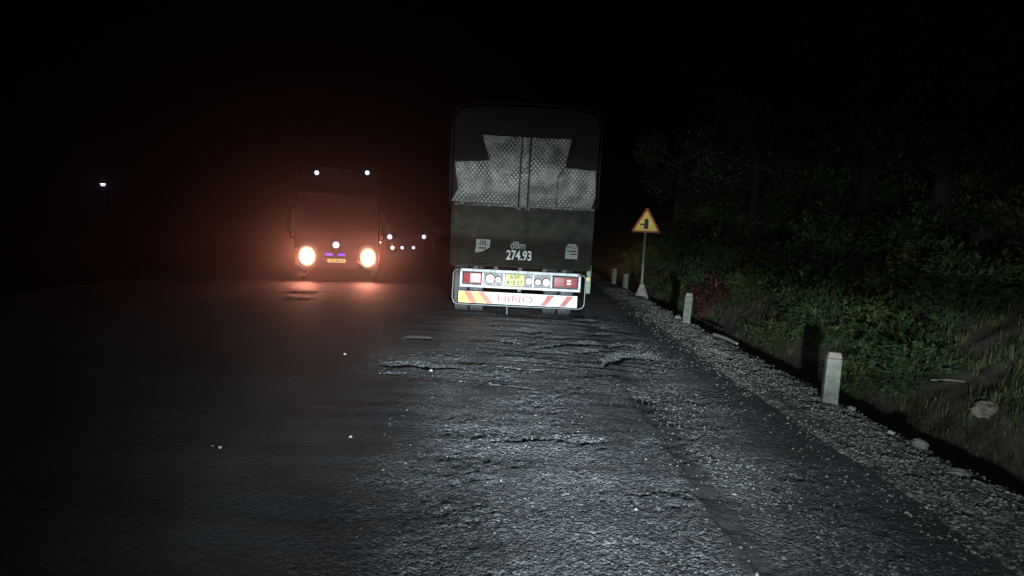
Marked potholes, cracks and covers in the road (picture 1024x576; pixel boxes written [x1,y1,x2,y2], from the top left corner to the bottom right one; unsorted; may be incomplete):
pothole [599,351,660,368]
